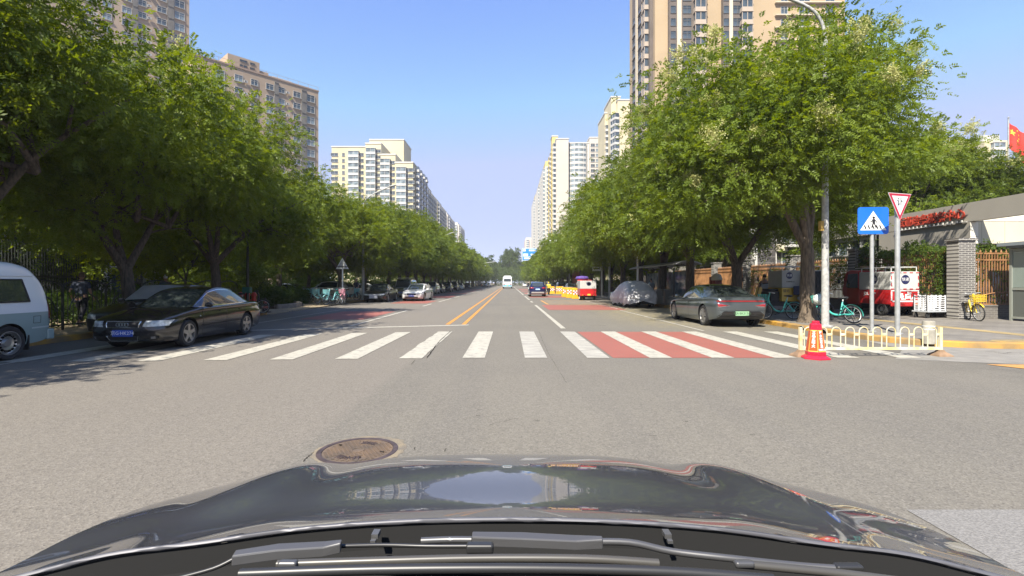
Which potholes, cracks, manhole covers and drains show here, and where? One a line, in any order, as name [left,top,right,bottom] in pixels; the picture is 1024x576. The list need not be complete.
manhole cover [310,436,407,464]
